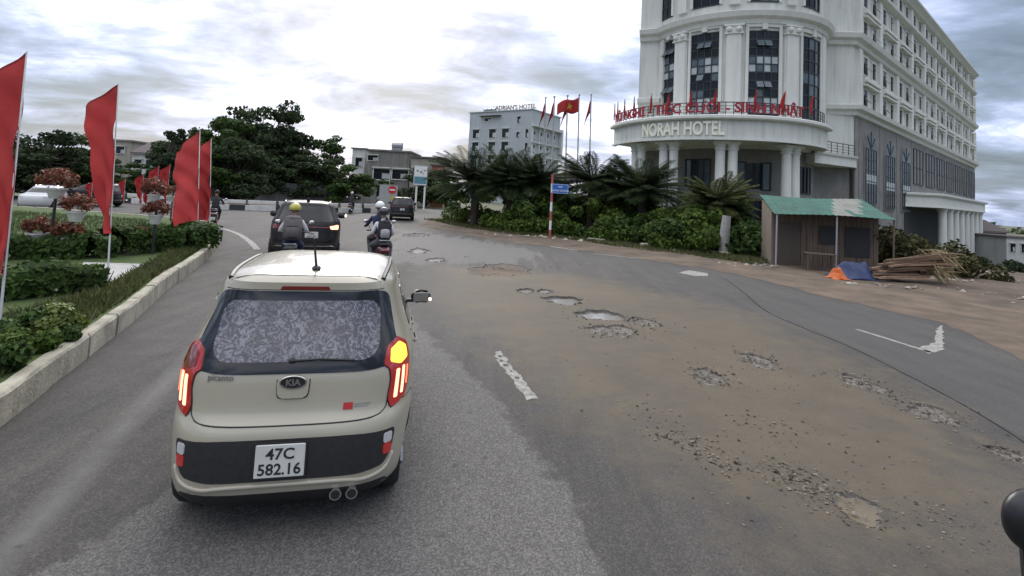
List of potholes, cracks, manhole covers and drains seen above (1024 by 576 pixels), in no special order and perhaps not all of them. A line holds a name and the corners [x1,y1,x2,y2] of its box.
pothole [828,368,905,402]
pothole [734,349,783,376]
pothole [573,309,630,321]
pothole [981,441,1024,470]
pothole [895,399,969,432]
pothole [823,487,892,530]
pothole [616,312,666,331]
pothole [683,361,741,389]
pothole [540,295,587,305]
pothole [578,324,644,345]
